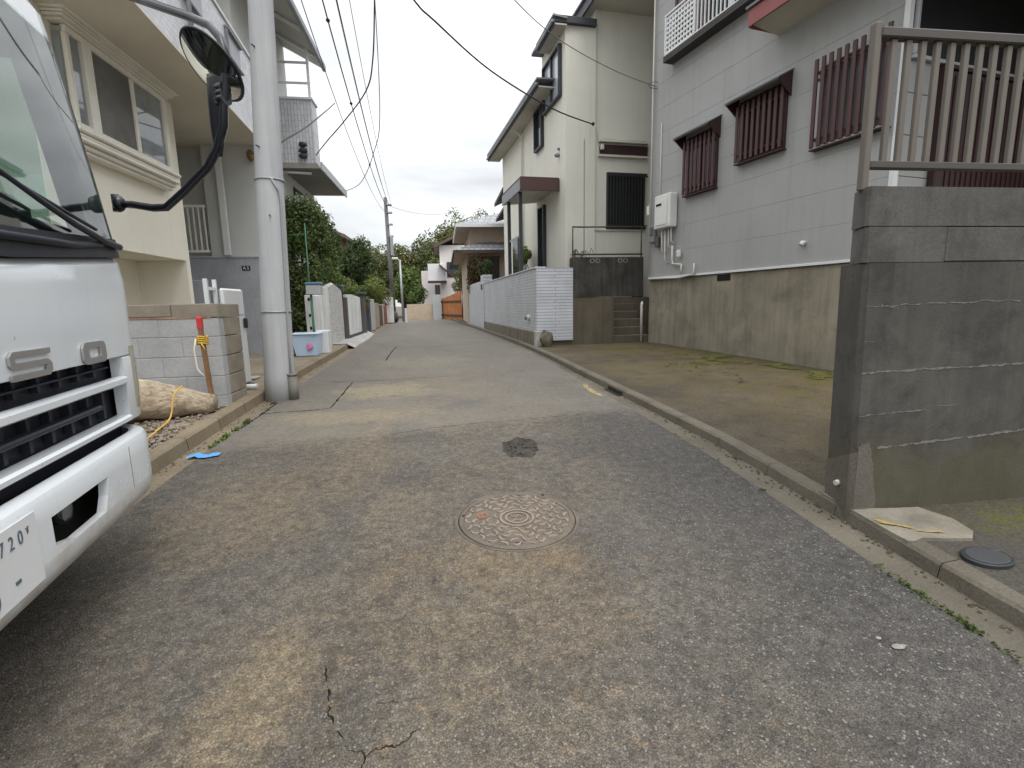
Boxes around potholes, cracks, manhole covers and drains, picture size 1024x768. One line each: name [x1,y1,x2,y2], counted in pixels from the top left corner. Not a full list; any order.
manhole cover [455,492,579,552]
utility cover [960,547,1015,570]
crack [324,669,416,768]
